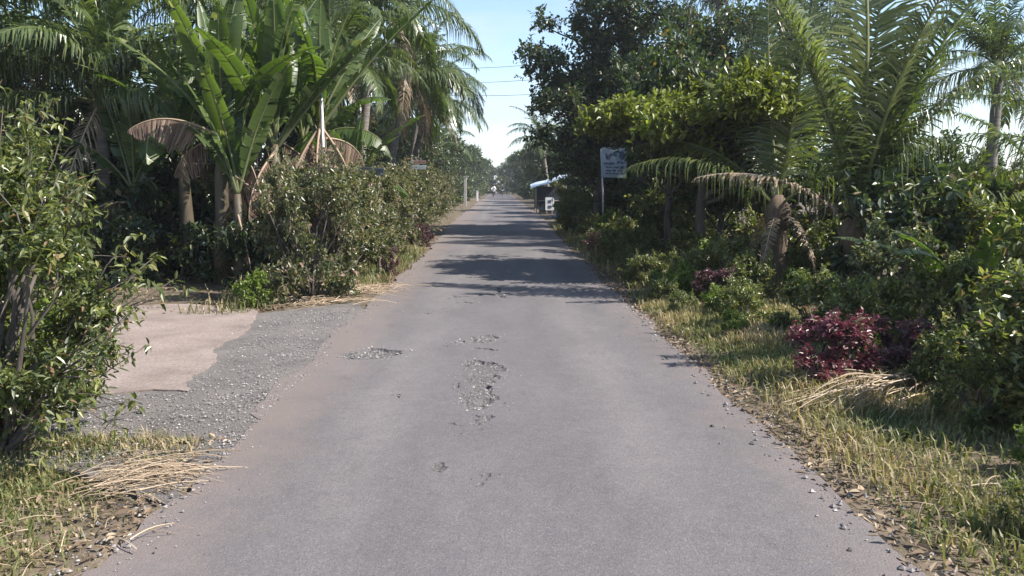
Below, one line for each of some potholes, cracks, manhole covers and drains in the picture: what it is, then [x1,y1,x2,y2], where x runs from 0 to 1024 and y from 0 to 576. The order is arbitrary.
pothole [337,345,413,362]
pothole [444,357,521,413]
pothole [469,472,504,492]
pothole [446,333,505,347]
